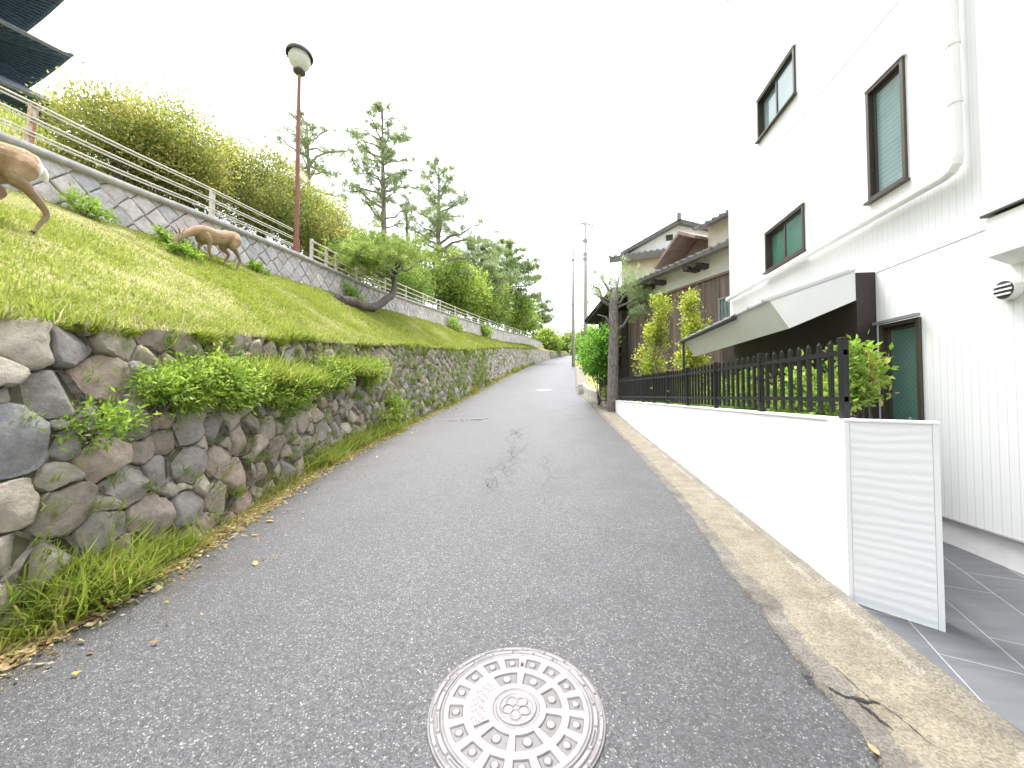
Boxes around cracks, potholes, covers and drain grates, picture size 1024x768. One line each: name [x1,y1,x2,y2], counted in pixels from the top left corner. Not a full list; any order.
crack [474,429,553,504]
crack [828,668,935,746]
manhole cover [427,647,606,768]
